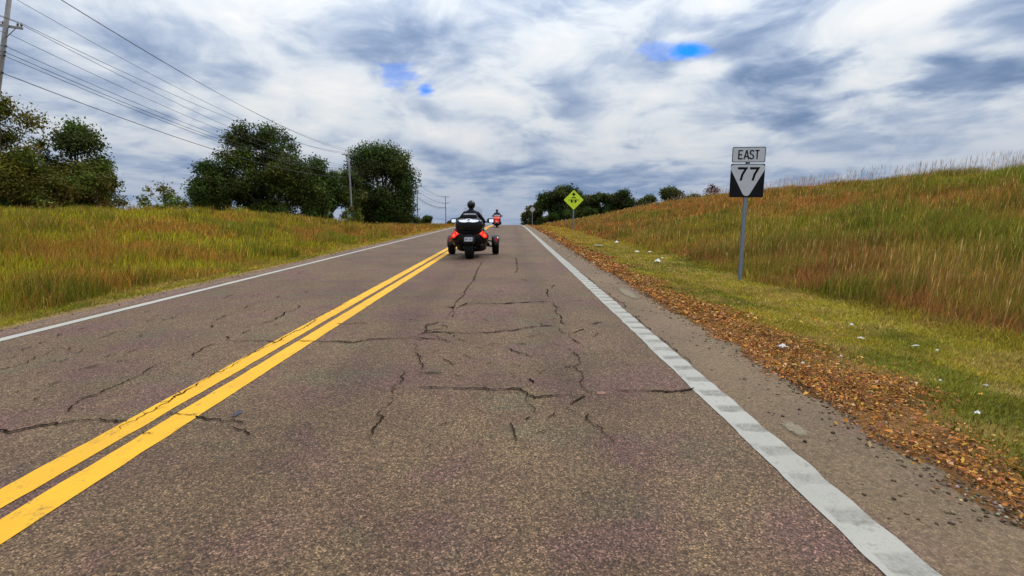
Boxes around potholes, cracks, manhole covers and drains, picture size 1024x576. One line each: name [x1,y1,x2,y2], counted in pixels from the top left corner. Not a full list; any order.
crack [0,263,692,443]
